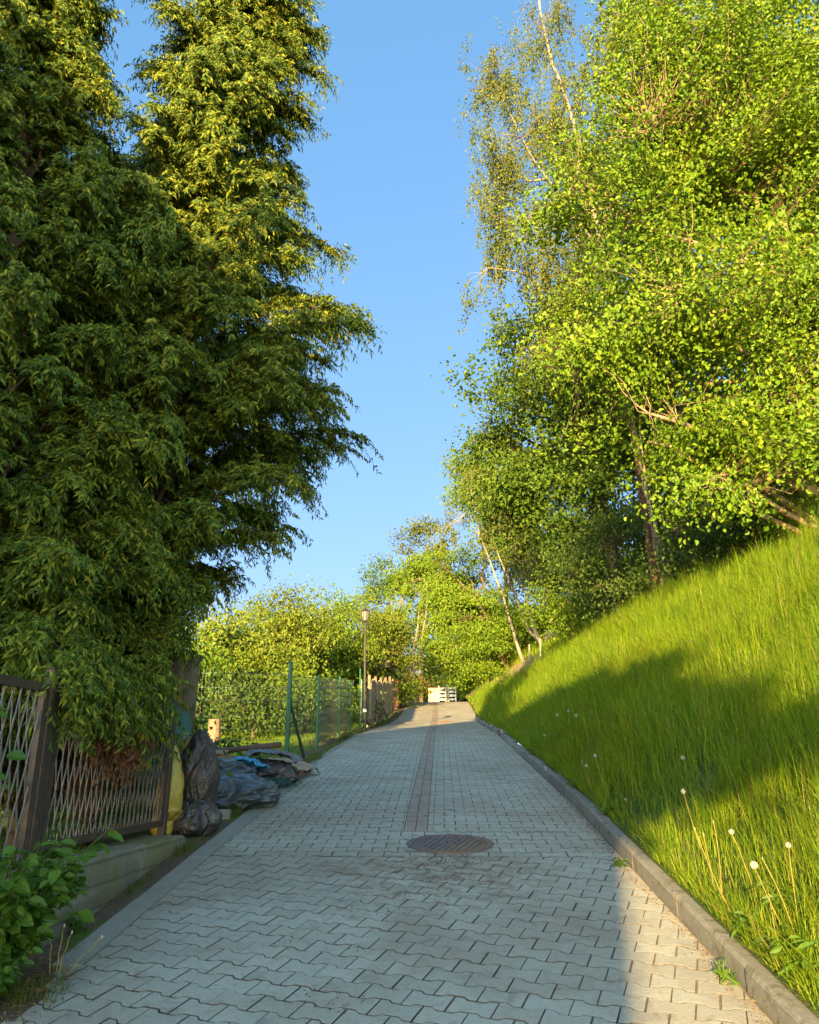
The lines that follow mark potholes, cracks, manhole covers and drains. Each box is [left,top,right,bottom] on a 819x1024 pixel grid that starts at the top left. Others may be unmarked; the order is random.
manhole cover [407,834,493,855]
